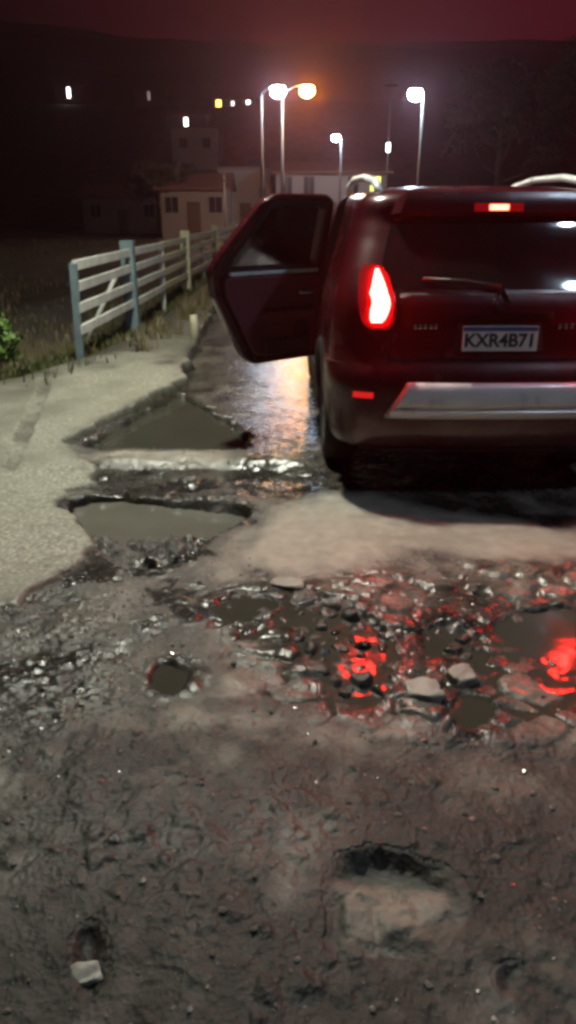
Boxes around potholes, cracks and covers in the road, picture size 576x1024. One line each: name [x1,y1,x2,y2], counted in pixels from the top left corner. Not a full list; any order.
pothole [417,618,494,666]
pothole [79,394,255,450]
pothole [67,919,114,1004]
pothole [491,960,531,995]
pothole [322,842,476,964]
pothole [211,588,281,624]
pothole [64,494,253,569]
pothole [489,601,576,672]
pothole [144,658,197,698]
pothole [445,691,503,731]
pothole [287,598,404,712]
